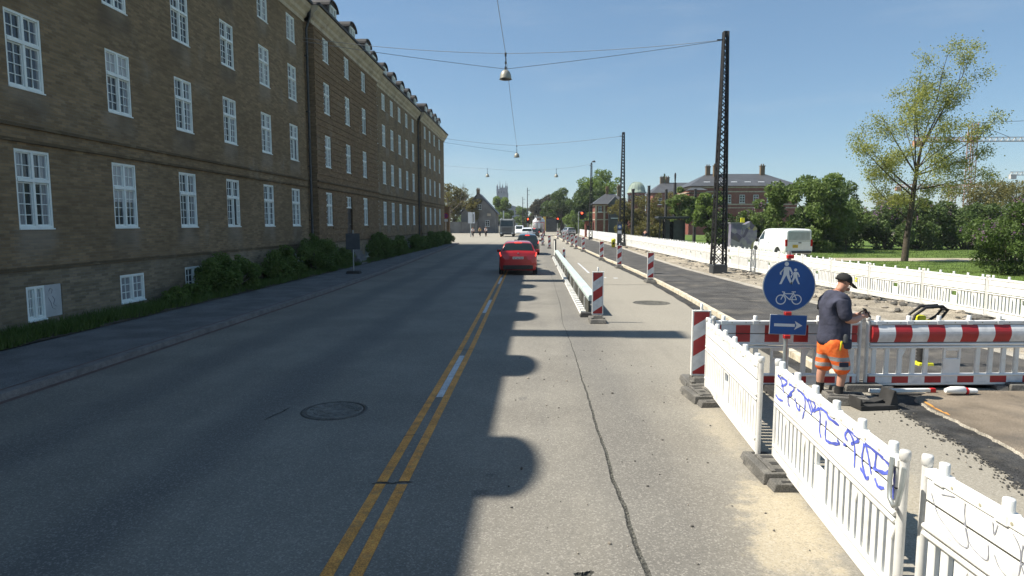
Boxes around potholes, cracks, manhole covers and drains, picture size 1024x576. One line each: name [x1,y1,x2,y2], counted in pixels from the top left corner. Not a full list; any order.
manhole cover [300,401,368,420]
